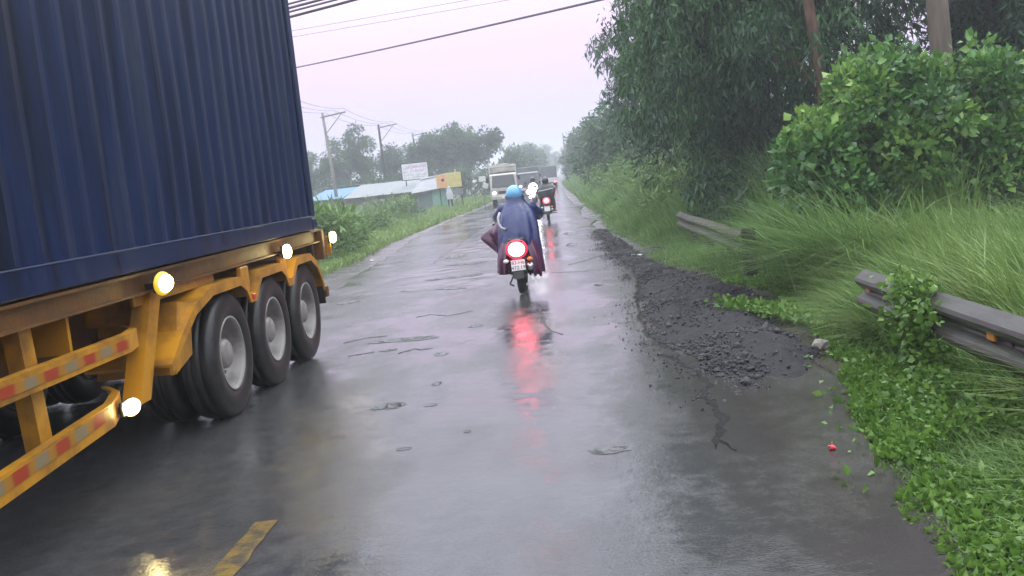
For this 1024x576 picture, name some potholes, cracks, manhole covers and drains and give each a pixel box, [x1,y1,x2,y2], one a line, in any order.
crack [538,304,560,334]
crack [657,353,736,450]
crack [345,336,431,356]
pothole [588,445,631,454]
pothole [367,335,438,344]
